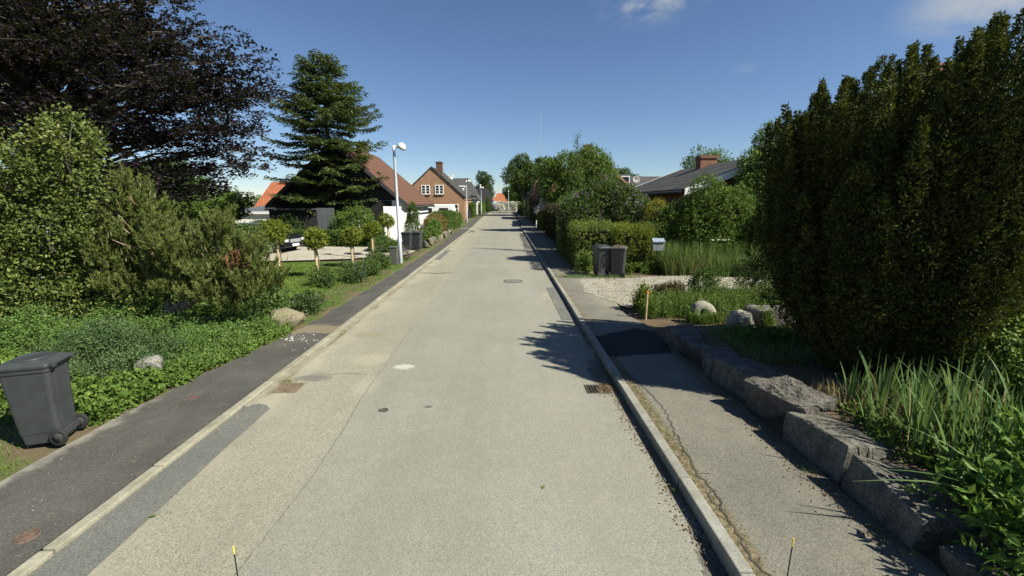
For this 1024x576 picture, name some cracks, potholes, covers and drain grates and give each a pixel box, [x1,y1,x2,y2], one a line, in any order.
drain grate [584,384,613,394]
drain grate [272,383,306,393]
crack [619,367,772,576]
utility cover [12,528,42,544]
